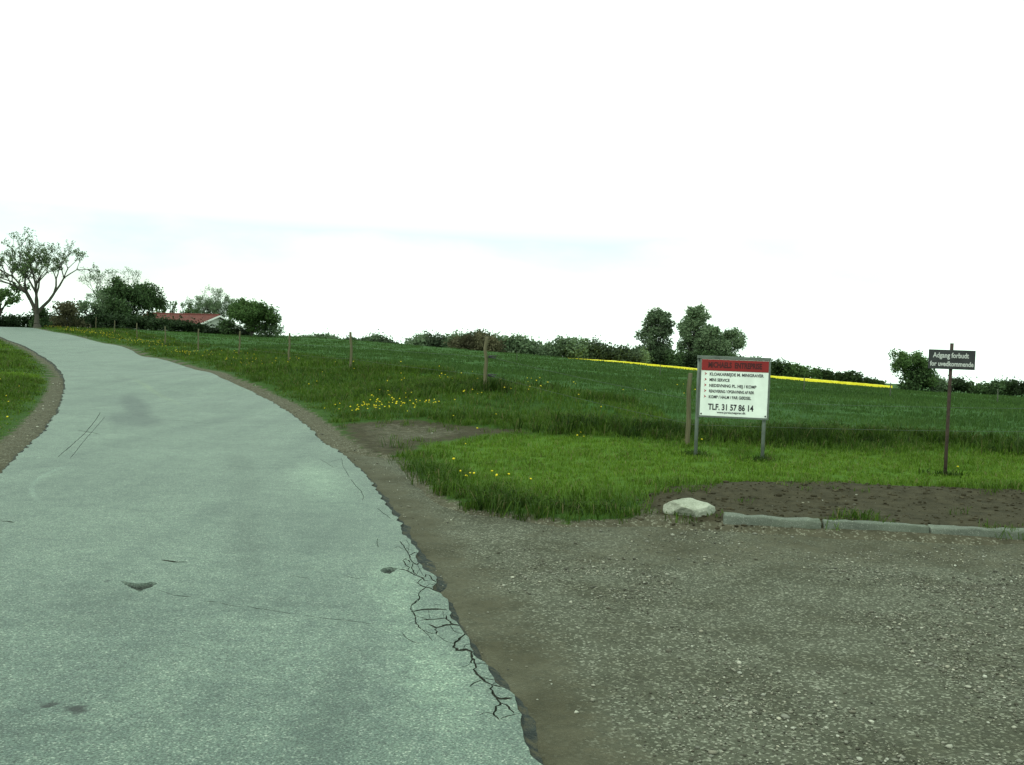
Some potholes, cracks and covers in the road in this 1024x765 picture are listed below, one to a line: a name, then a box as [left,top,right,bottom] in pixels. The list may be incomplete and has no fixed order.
crack [159,590,369,624]
crack [395,540,516,720]
pothole [121,581,157,592]
crack [58,413,103,458]
